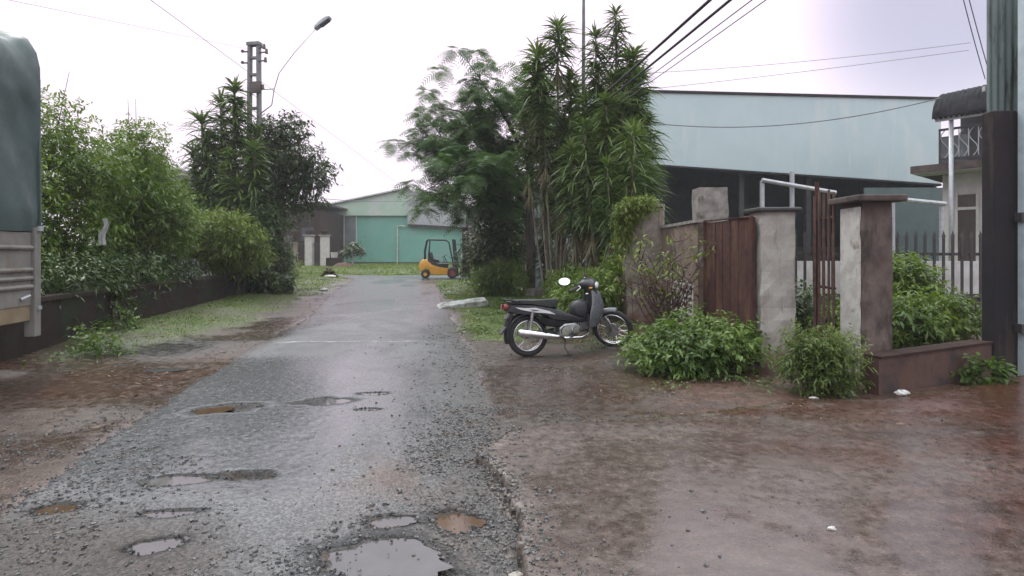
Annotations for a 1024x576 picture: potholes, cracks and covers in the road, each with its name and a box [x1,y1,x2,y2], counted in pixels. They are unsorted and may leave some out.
pothole [279,397,356,406]
pothole [138,472,218,487]
pothole [306,532,462,576]
pothole [359,511,417,528]
pothole [216,470,276,481]
pothole [189,402,265,415]
pothole [20,501,88,516]
pothole [426,507,490,535]
pothole [136,507,208,518]
pothole [122,534,184,557]
